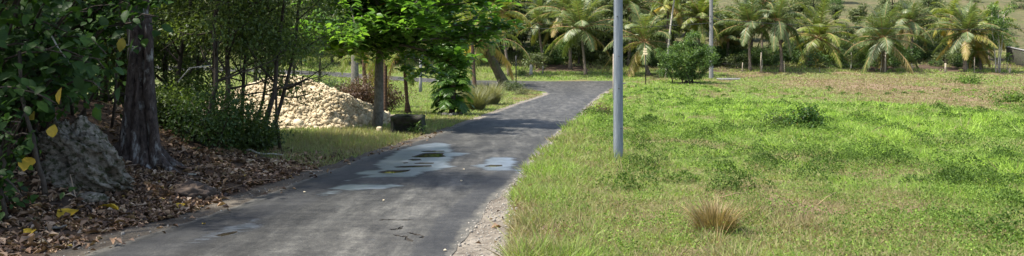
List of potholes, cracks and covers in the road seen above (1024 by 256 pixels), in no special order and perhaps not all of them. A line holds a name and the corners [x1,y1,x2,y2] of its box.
crack [381,219,424,242]
